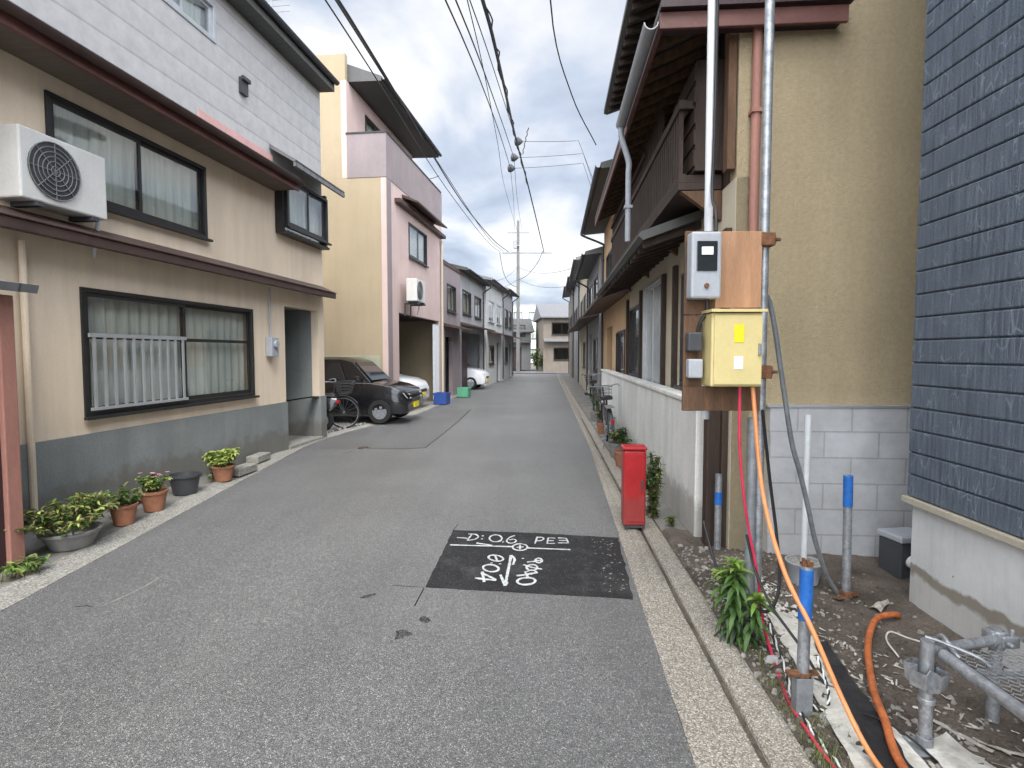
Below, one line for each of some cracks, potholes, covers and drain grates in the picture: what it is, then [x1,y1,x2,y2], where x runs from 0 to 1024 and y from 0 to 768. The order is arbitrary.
pothole [394,630,412,639]
